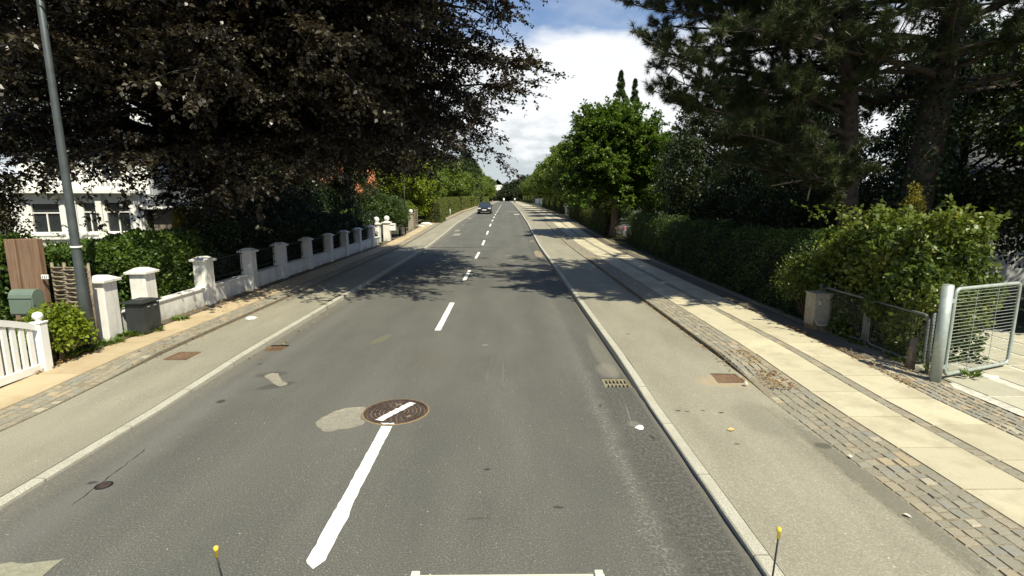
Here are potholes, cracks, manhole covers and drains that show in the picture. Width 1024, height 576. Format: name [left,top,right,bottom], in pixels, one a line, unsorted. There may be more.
manhole cover [362,399,429,425]
drain grate [602,379,632,387]
crack [72,449,145,505]
